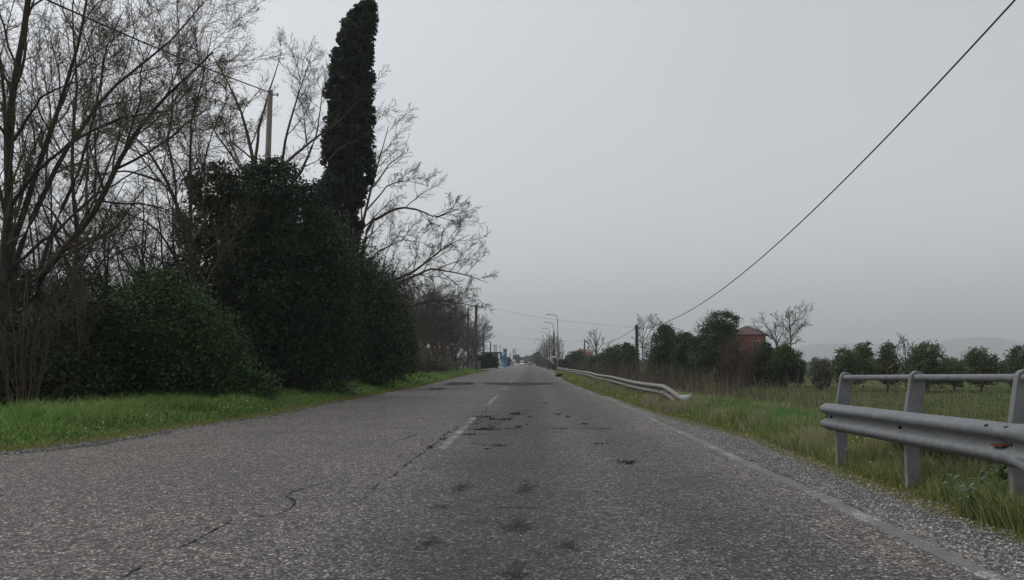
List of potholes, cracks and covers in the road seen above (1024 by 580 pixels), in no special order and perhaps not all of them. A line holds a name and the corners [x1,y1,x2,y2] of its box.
crack [174,482,329,559]
